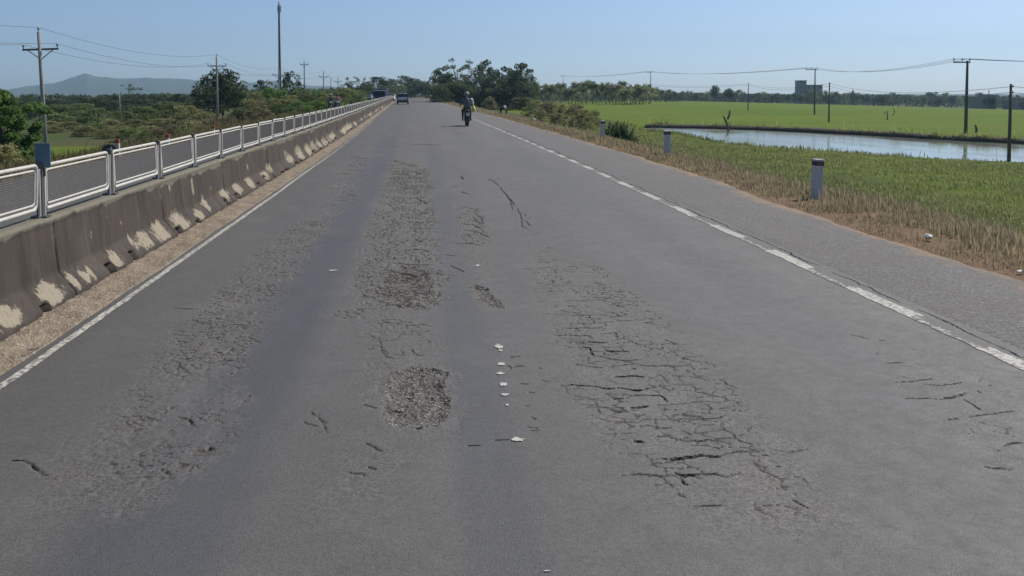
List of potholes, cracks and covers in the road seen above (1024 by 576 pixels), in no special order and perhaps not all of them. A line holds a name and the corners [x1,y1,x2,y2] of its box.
crack [851,334,1024,471]
pothole [467,284,504,309]
crack [65,144,456,485]
crack [444,176,553,271]
crack [526,255,809,518]
pothole [382,366,452,430]
